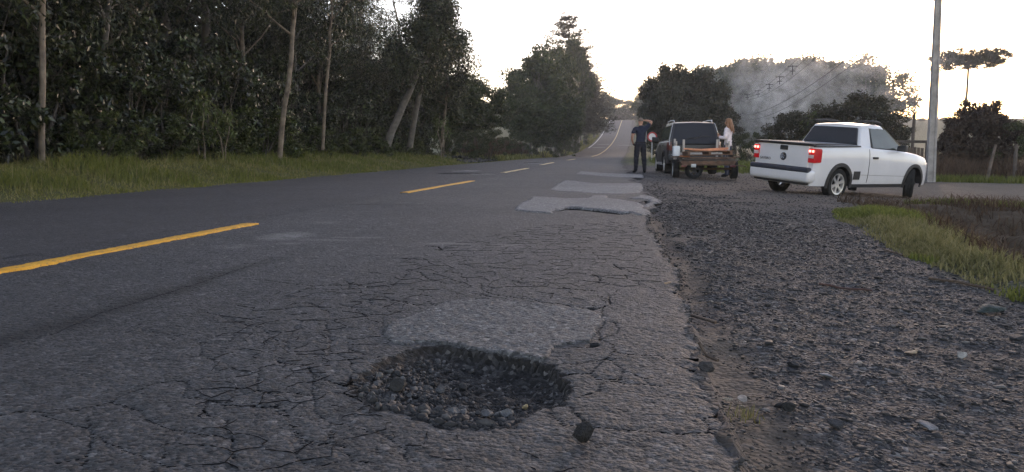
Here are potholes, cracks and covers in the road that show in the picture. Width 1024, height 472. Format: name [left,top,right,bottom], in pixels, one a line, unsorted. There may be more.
pothole [343,345,574,431]
crack [0,222,699,472]
crack [594,412,718,435]
